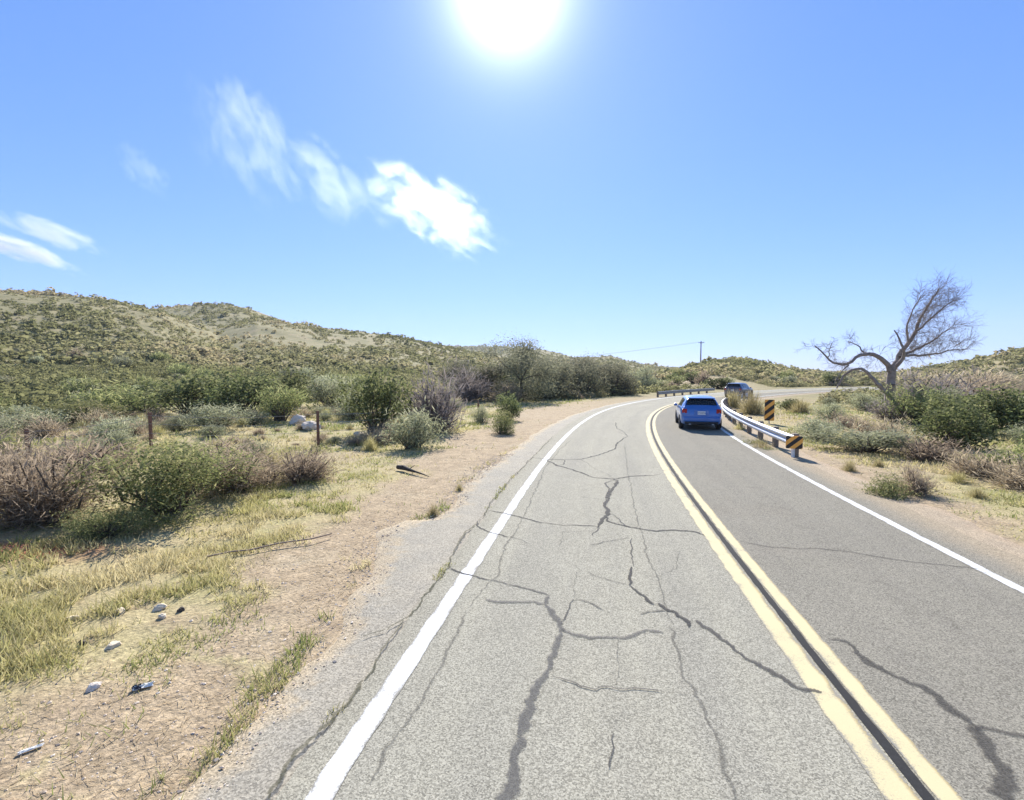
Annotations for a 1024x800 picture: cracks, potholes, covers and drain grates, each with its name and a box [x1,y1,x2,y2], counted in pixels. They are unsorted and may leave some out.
crack [268,424,822,799]
